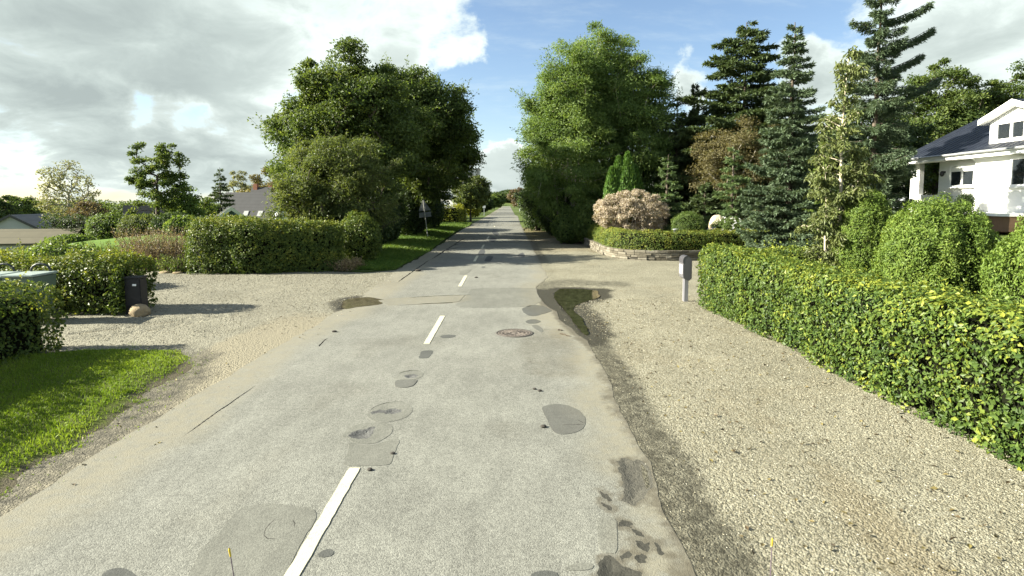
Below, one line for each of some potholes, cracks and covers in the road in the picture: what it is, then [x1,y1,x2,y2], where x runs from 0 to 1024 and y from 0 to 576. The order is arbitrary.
pothole [596,555,642,576]
manhole cover [496,329,533,338]
pothole [347,427,375,439]
